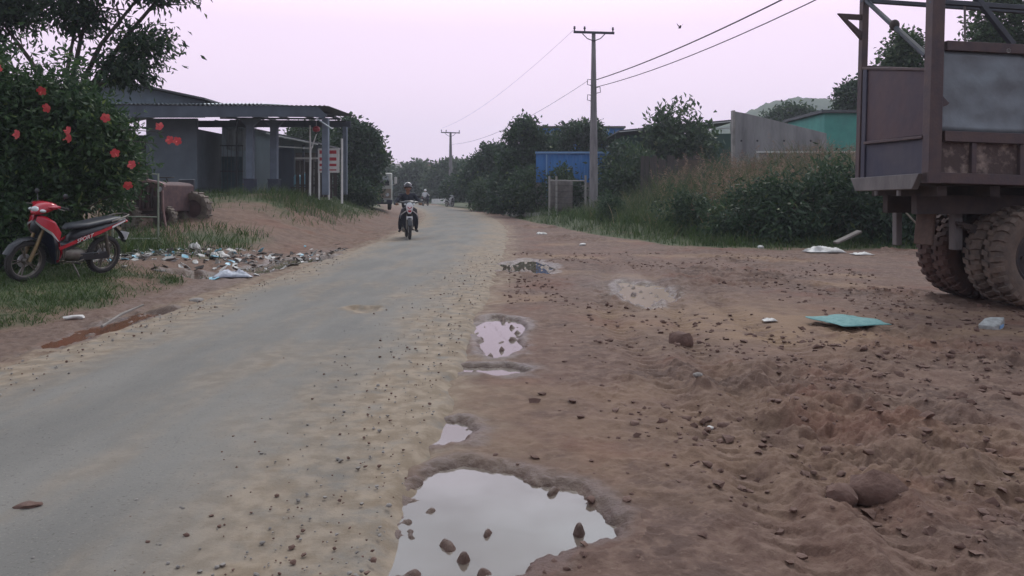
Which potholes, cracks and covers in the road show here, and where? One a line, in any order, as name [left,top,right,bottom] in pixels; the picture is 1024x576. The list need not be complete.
pothole [429,413,489,450]
pothole [495,258,566,275]
pothole [470,313,535,360]
pothole [388,451,647,576]
pothole [458,361,539,377]
pothole [333,304,390,314]
